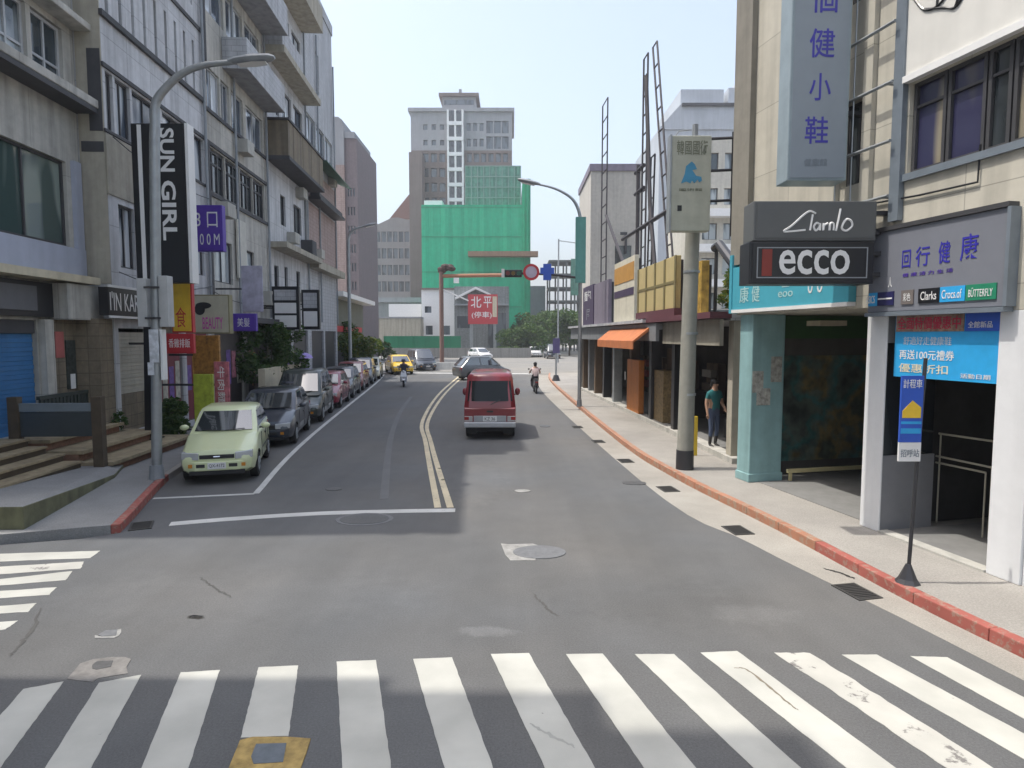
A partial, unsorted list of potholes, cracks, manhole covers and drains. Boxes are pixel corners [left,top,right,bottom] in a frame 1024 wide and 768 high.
crack [534,594,560,616]
crack [200,577,231,598]
crack [530,723,575,748]
crack [739,667,798,710]
manhole cover [501,543,566,561]
drain grate [128,520,154,531]
crack [9,608,41,656]
manhole cover [229,737,311,768]
drain grate [721,525,755,535]
drain grate [831,583,883,601]
manhole cover [335,513,393,526]
